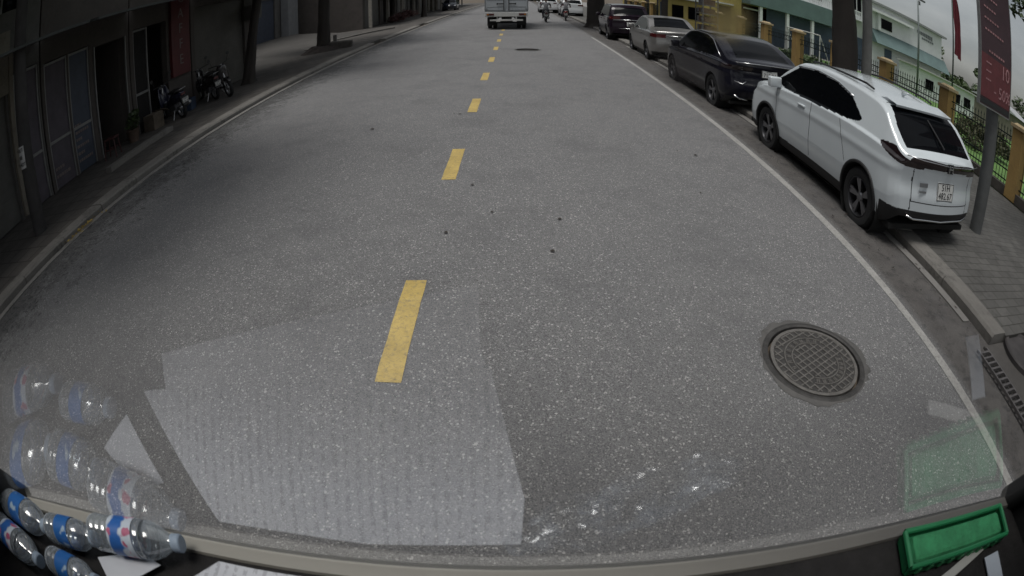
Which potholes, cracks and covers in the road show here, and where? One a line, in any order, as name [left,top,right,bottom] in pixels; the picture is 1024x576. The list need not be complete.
manhole cover [758,320,871,407]
